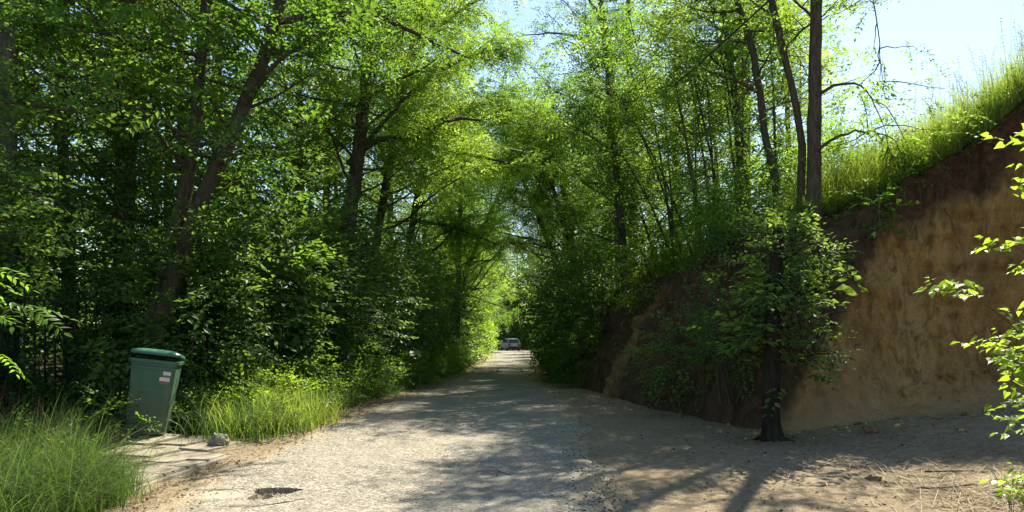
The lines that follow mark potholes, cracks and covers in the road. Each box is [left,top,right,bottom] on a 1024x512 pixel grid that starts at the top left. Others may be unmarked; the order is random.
pothole [246,487,304,500]
